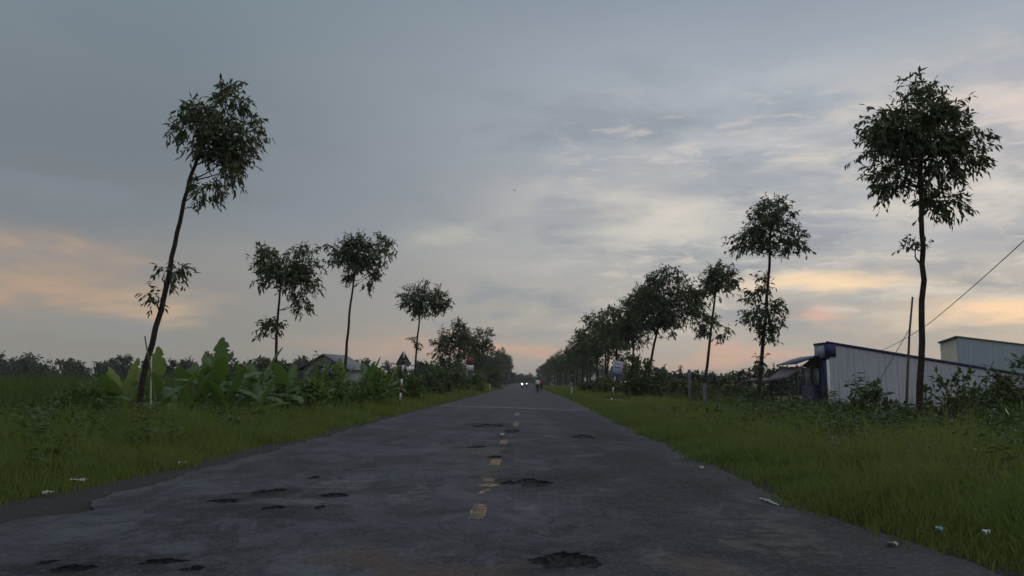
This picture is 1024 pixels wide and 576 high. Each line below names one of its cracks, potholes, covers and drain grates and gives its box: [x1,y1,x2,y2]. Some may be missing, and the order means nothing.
pothole [55,566,93,574]
pothole [532,553,601,571]
pothole [514,480,553,488]
pothole [253,489,286,497]
